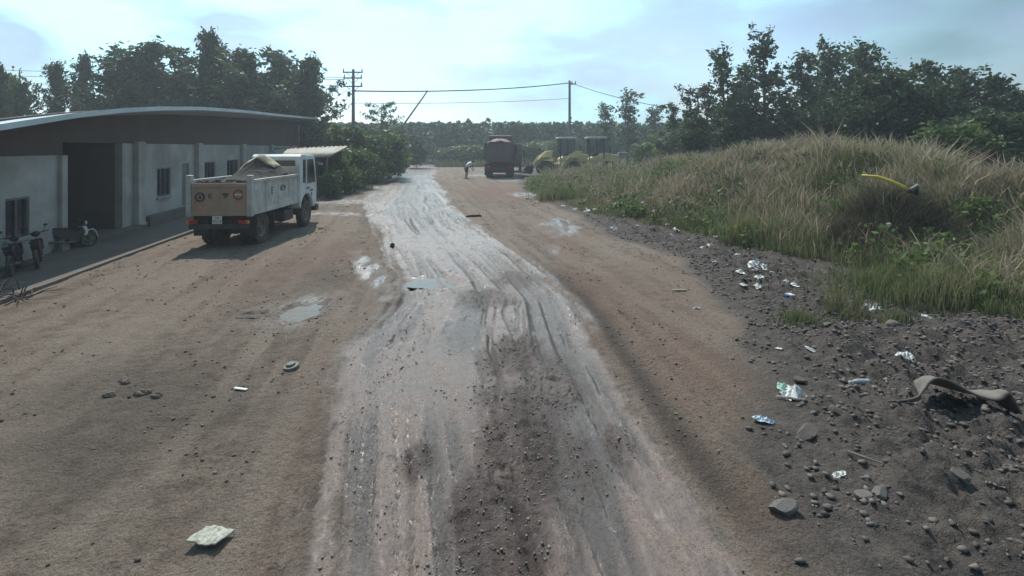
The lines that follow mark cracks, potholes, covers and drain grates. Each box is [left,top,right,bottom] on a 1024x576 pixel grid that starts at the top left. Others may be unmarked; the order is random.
pothole [266,297,339,325]
pothole [390,273,477,294]
